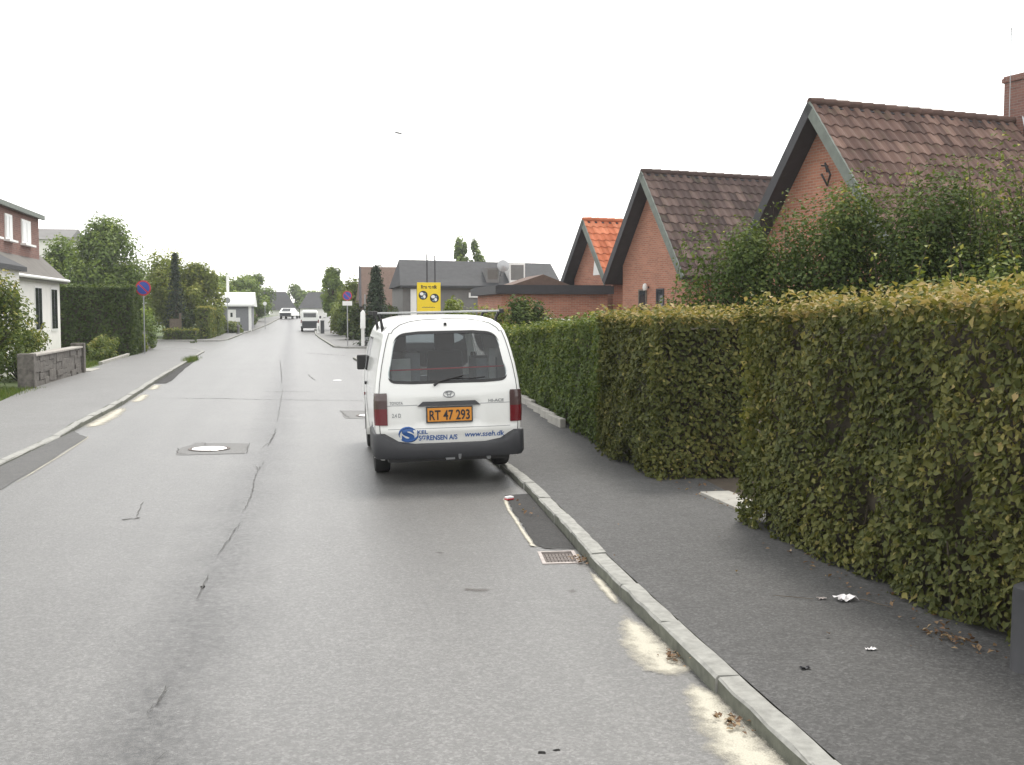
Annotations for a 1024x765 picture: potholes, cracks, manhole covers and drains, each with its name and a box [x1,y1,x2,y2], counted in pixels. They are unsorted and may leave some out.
crack [195,361,352,554]
